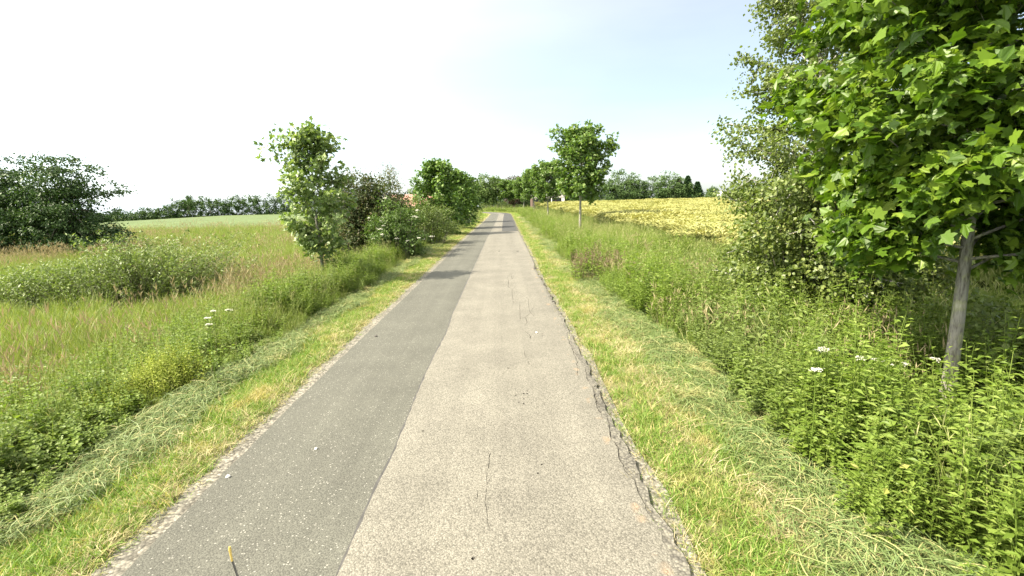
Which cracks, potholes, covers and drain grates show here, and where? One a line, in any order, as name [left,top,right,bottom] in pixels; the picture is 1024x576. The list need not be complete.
crack [566,333,648,513]
